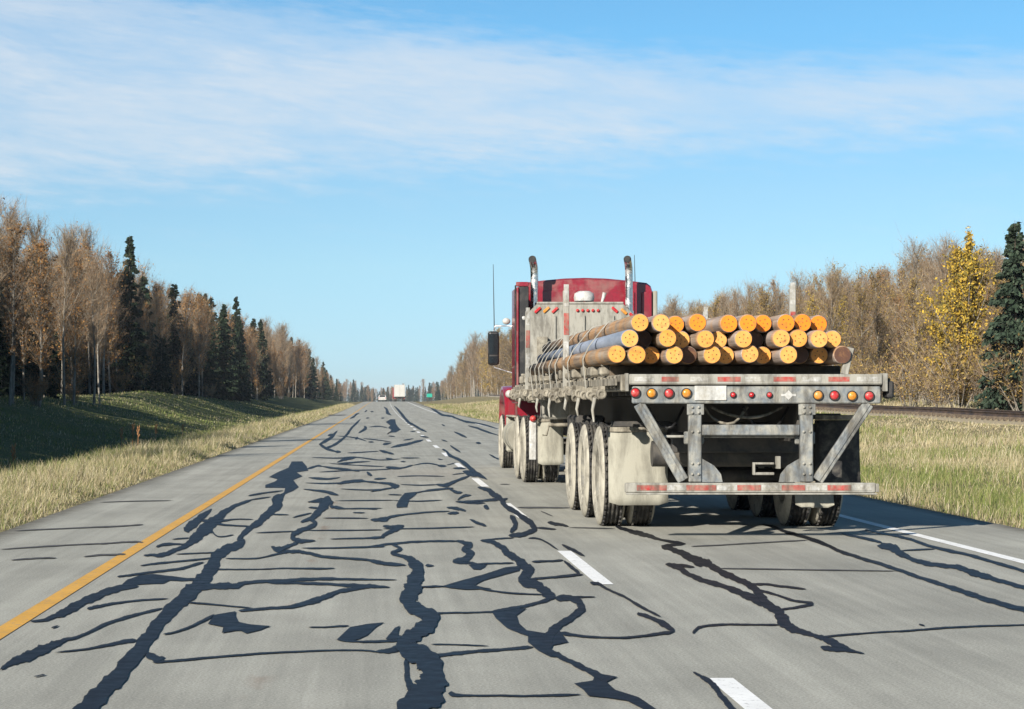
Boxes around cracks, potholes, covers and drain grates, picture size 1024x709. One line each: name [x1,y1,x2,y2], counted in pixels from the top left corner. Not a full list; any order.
crack [518,507,570,516]
crack [6,524,143,560]
